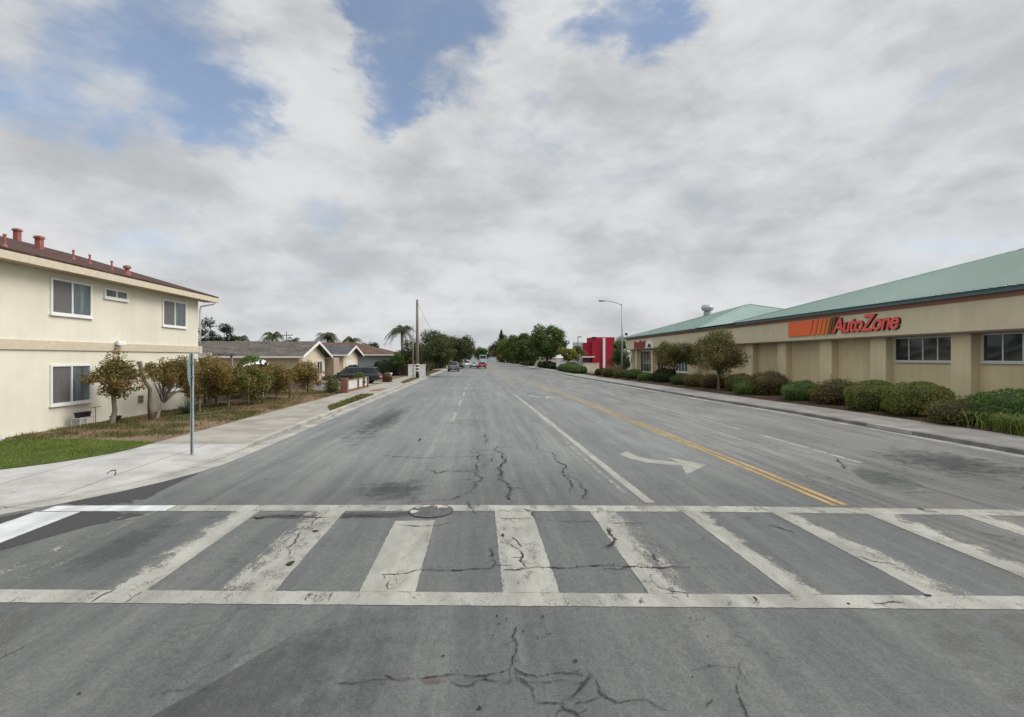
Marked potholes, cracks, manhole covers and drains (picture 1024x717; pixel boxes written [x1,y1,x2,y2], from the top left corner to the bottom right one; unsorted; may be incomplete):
crack [695,655,749,717]
crack [412,628,667,717]
crack [382,538,690,604]
crack [245,435,633,554]
manhole cover [409,504,453,518]
